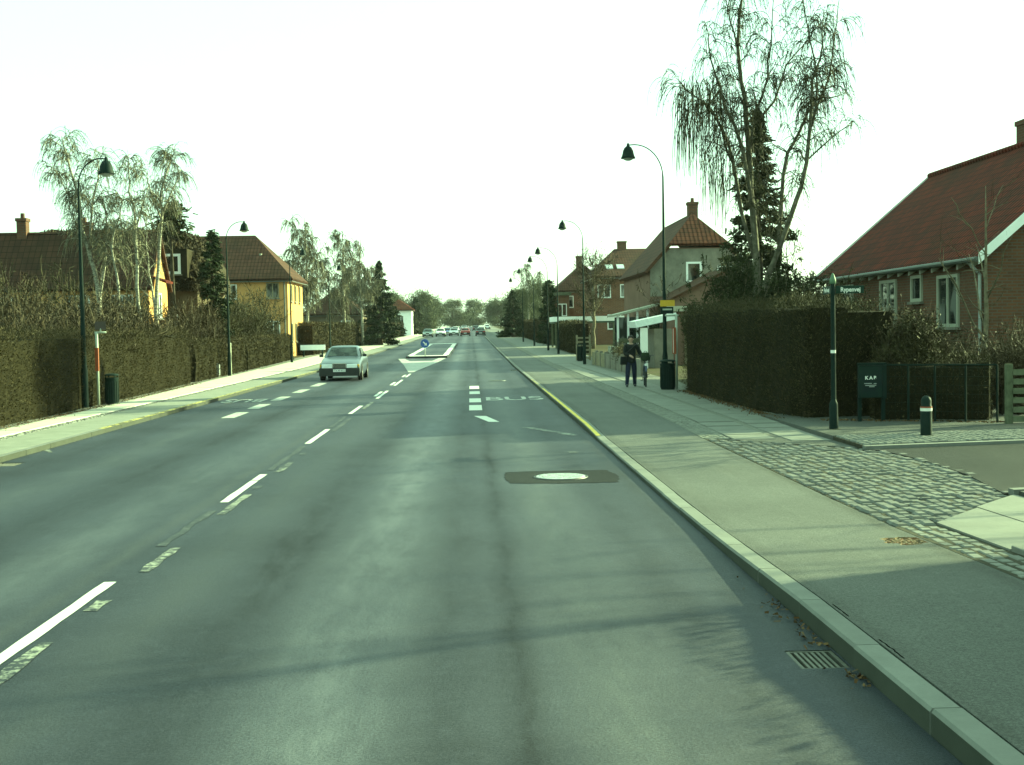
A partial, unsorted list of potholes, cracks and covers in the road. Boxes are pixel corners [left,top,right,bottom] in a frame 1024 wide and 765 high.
drain grate [786,650,850,669]
